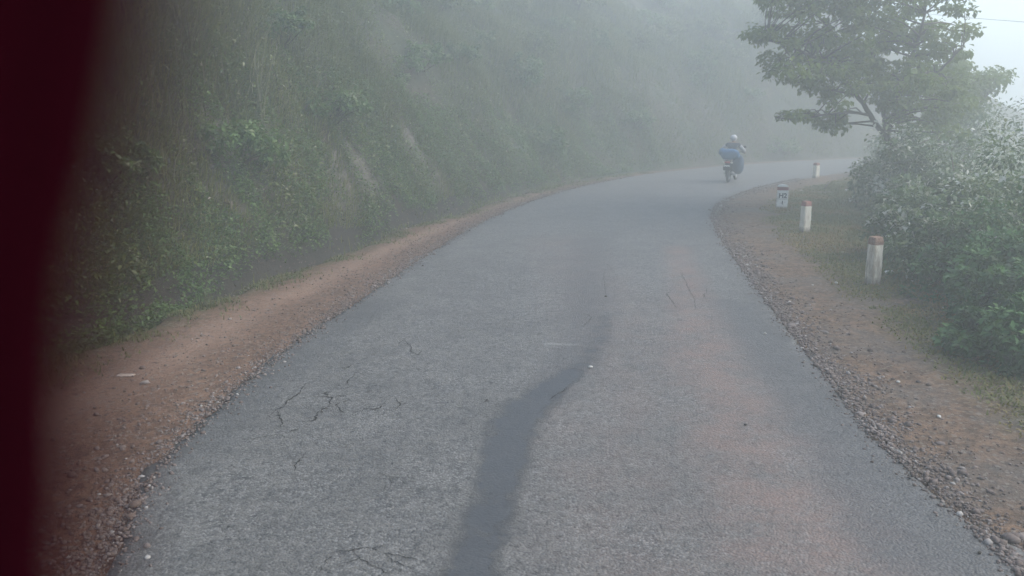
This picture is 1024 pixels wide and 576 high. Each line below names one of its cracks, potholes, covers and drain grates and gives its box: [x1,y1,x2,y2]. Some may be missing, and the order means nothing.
crack [254,365,406,439]
crack [320,547,429,572]
